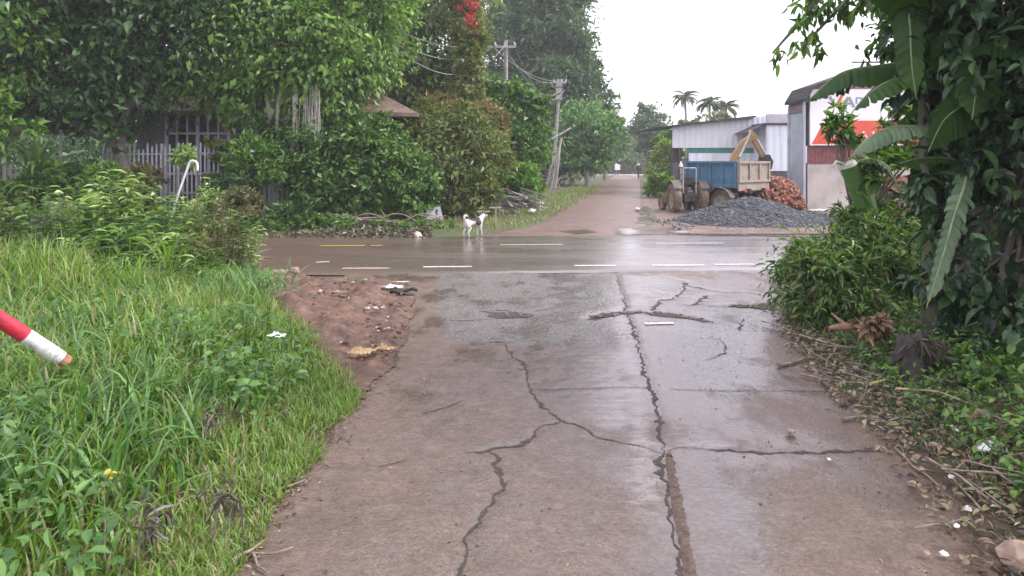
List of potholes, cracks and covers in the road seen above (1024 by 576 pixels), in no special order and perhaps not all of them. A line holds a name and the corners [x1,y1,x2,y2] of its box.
crack [457,279,875,576]
